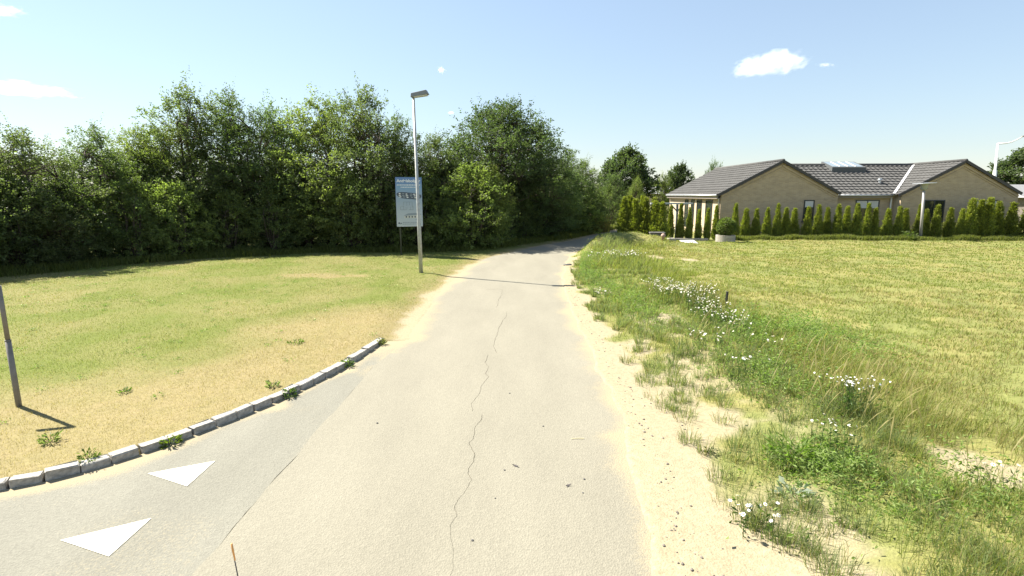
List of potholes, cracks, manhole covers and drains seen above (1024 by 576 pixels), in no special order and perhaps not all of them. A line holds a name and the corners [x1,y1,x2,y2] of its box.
crack [450,290,507,555]
